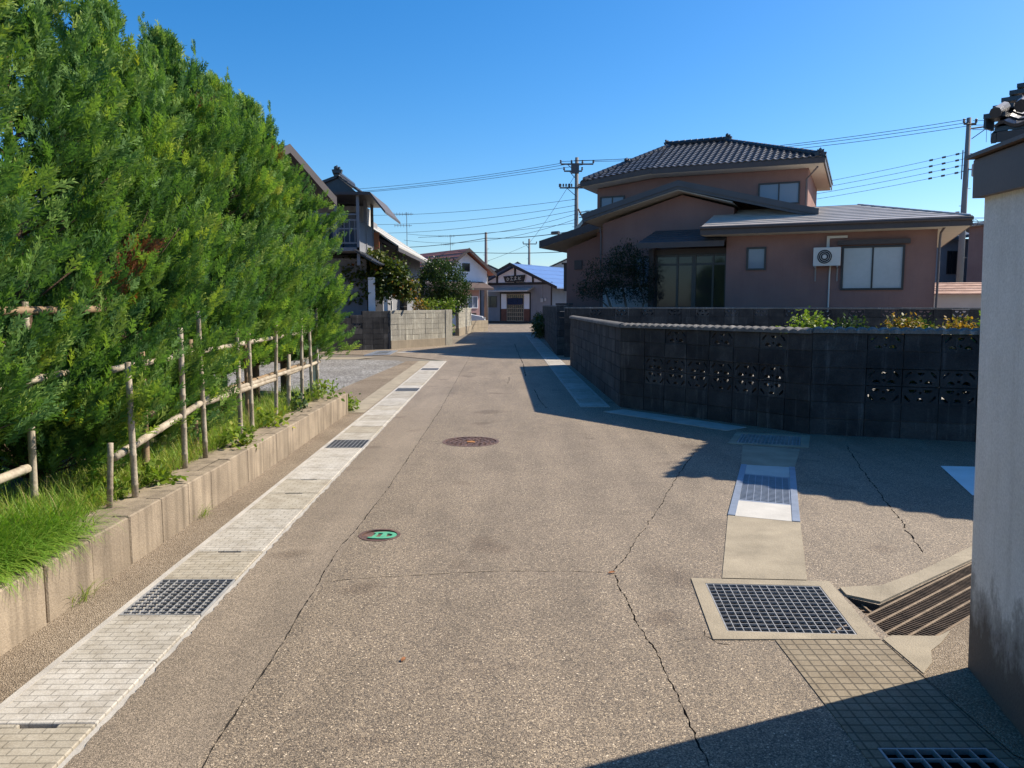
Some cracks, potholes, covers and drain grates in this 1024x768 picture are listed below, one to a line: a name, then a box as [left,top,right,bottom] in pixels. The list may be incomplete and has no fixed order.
crack [847,446,923,553]
drain grate [831,562,972,636]
drain grate [119,579,235,617]
manhole cover [359,529,401,541]
drain grate [691,578,880,641]
drain grate [325,440,370,449]
drain grate [728,432,810,448]
drain grate [728,464,800,522]
manhole cover [442,436,499,447]
drain grate [877,748,1008,768]
